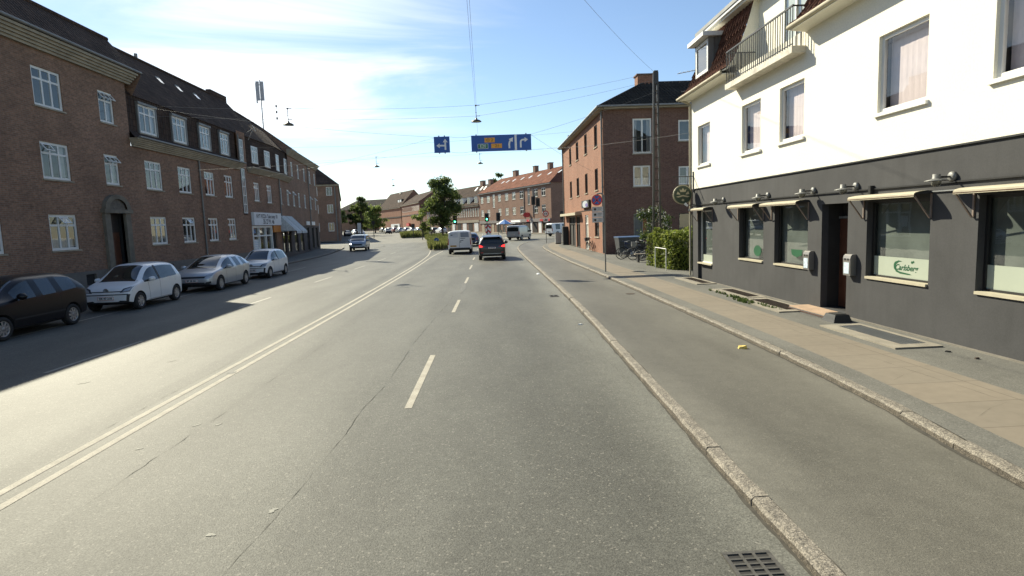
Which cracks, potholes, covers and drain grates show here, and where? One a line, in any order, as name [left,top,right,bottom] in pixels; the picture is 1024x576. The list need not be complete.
drain grate [721,550,790,576]
